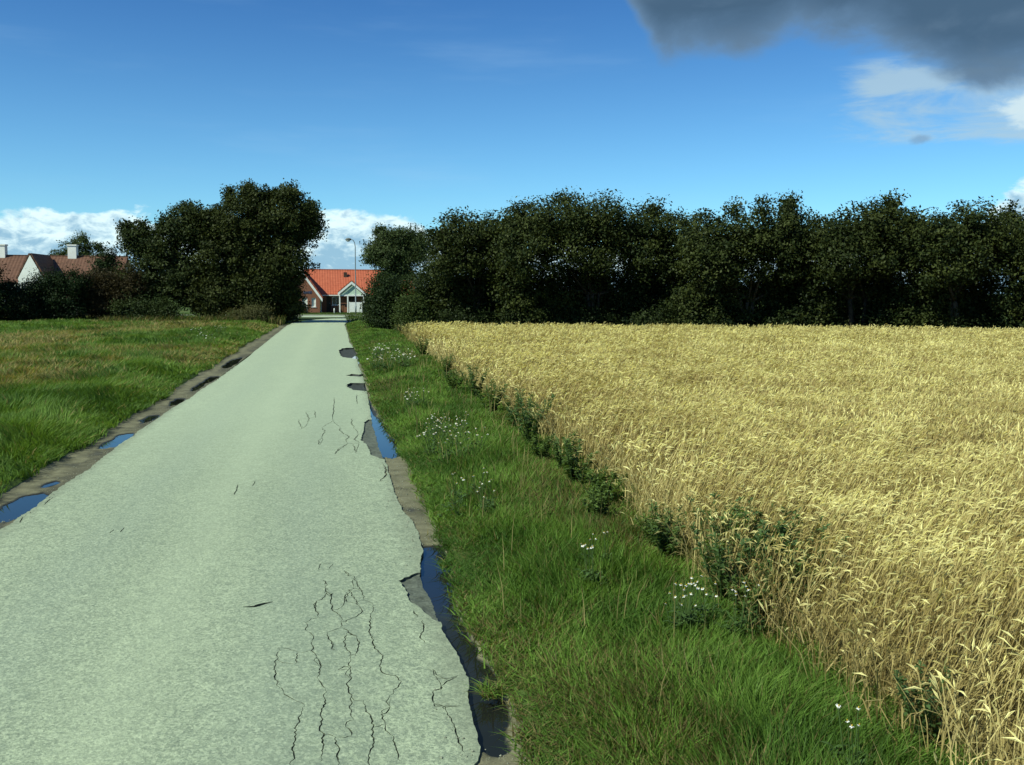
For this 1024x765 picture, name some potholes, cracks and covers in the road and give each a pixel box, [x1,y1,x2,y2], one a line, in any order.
crack [298,394,359,454]
pothole [361,419,383,459]
crack [432,670,464,752]
crack [273,563,402,765]
pothole [346,383,365,391]
pothole [339,348,356,358]
pothole [399,573,438,621]
